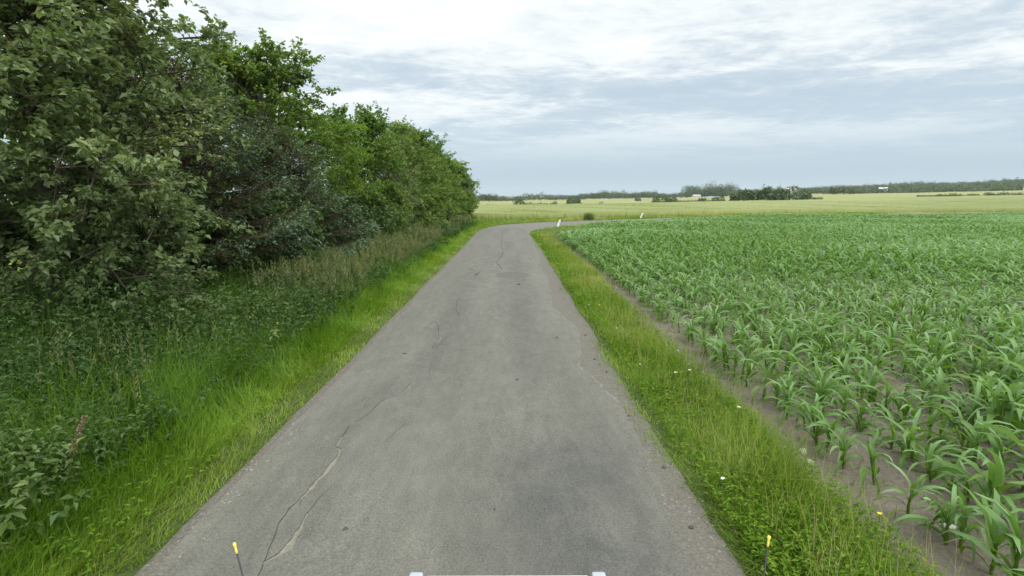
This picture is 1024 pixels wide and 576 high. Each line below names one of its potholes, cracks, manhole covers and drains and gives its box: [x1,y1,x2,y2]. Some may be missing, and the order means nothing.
crack [258,387,407,576]
